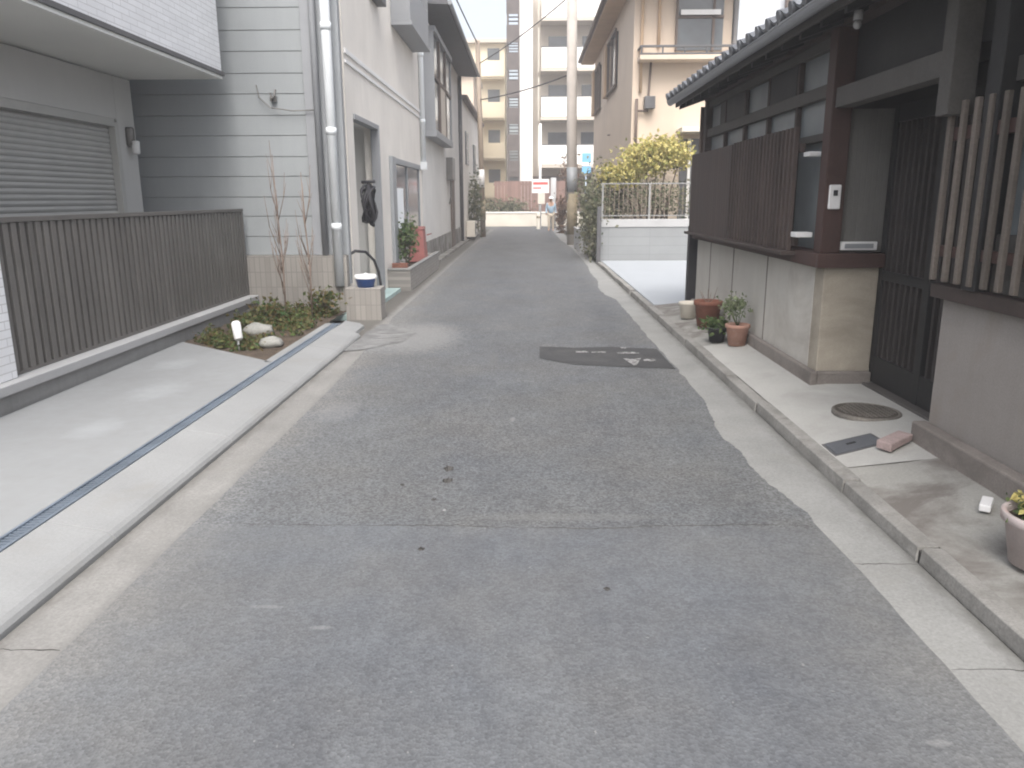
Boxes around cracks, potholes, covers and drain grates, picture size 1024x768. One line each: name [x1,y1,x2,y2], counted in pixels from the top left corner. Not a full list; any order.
manhole cover [831,402,902,422]
manhole cover [821,433,880,456]
